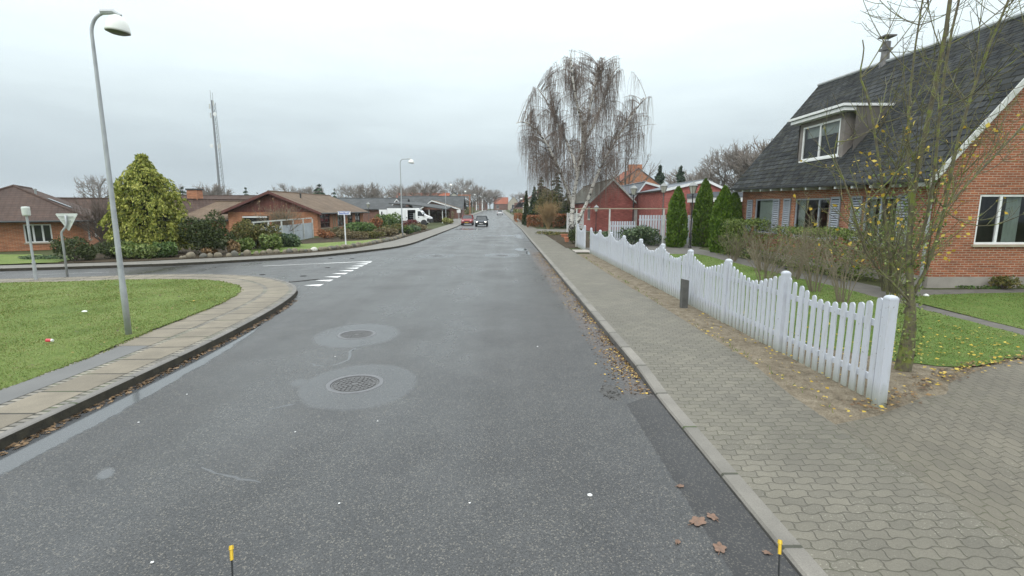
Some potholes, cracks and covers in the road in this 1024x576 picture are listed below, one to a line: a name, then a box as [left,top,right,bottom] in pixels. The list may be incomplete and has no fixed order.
manhole cover [325,374,384,394]
manhole cover [337,330,376,339]
crack [311,347,361,366]
crack [201,466,261,483]
